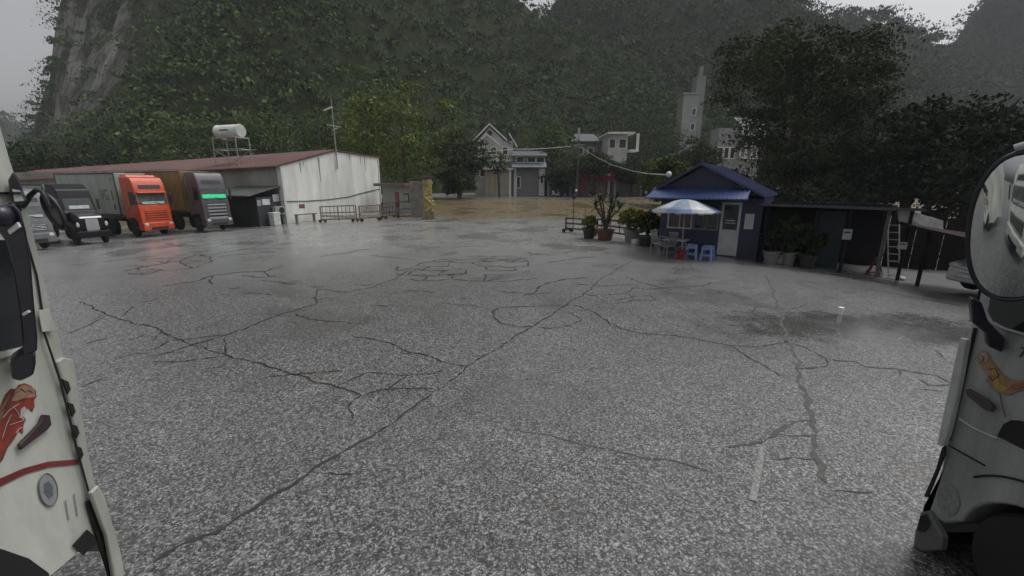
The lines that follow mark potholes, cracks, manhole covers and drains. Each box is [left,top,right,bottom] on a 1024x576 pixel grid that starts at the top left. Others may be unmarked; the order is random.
crack [500,427,713,473]
crack [790,342,950,392]
crack [320,246,711,329]
crack [725,419,818,460]
crack [265,313,468,421]
crack [124,243,295,302]
